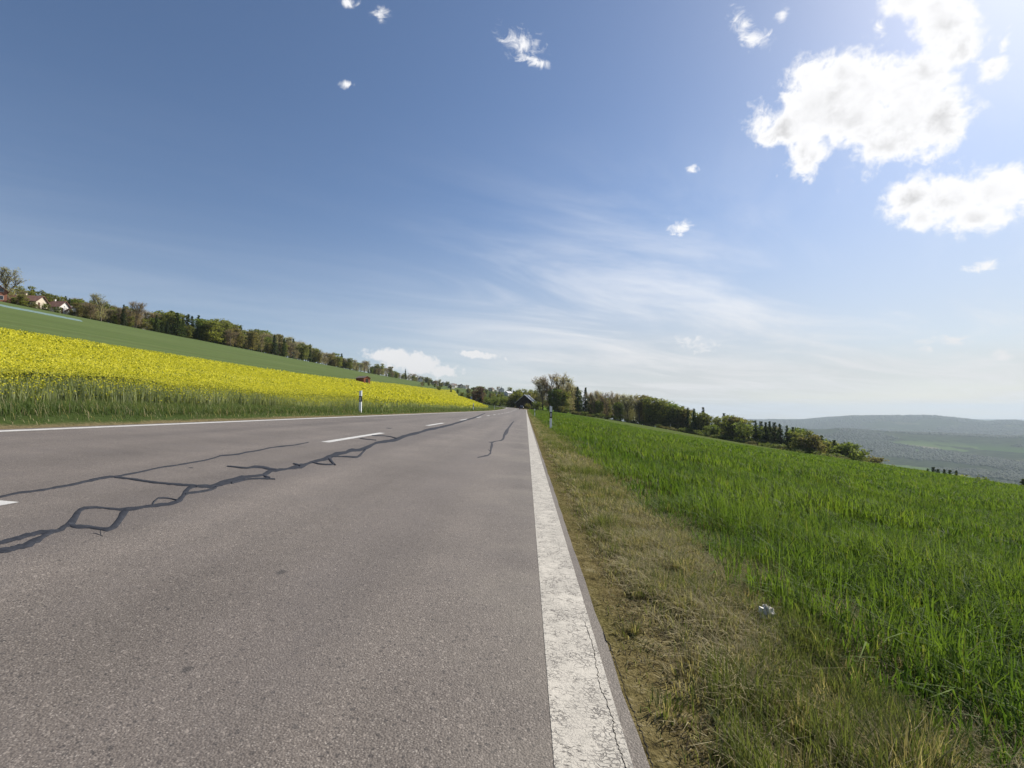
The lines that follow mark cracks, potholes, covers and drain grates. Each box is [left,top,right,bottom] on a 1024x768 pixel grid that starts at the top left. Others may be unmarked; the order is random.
crack [585,624,653,768]
